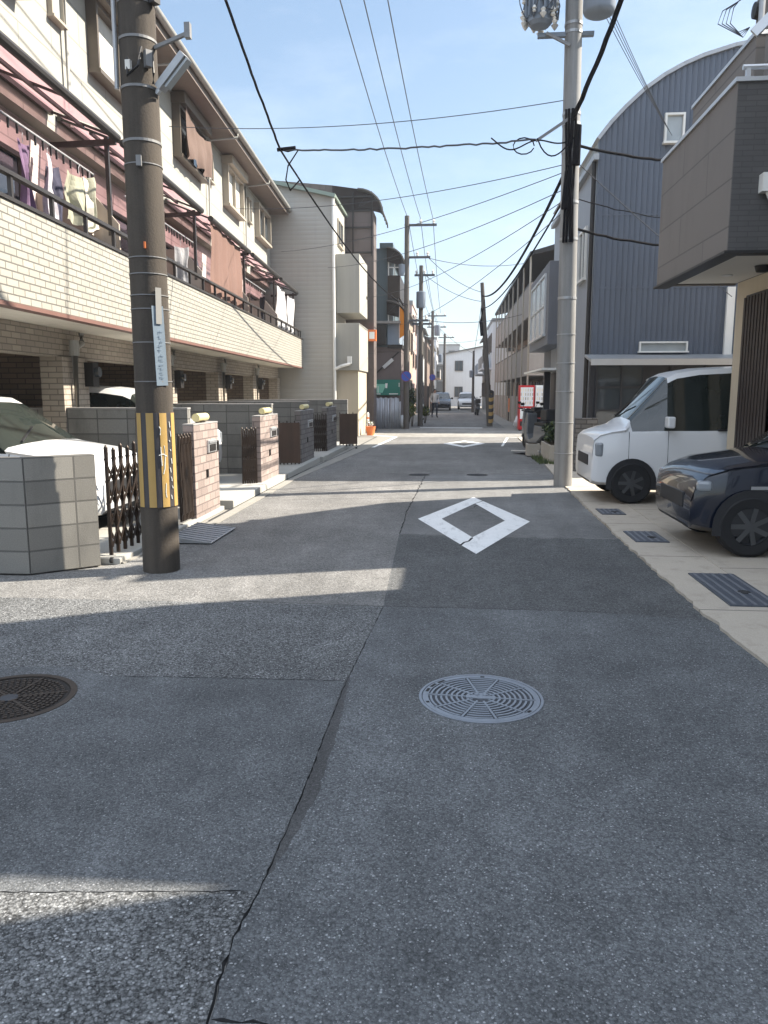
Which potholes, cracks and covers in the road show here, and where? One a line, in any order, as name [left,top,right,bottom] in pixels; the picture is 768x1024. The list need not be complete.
manhole cover [0,674,77,723]
manhole cover [419,674,544,724]
